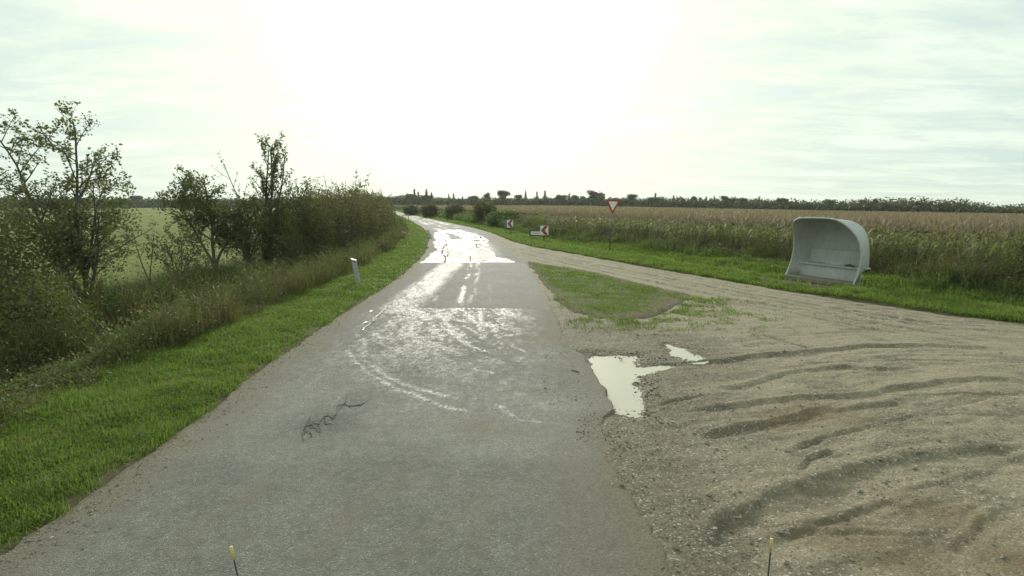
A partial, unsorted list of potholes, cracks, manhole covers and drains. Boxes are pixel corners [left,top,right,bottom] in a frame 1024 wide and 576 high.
pothole [654,341,713,366]
crack [301,401,365,442]
pothole [577,348,682,421]
